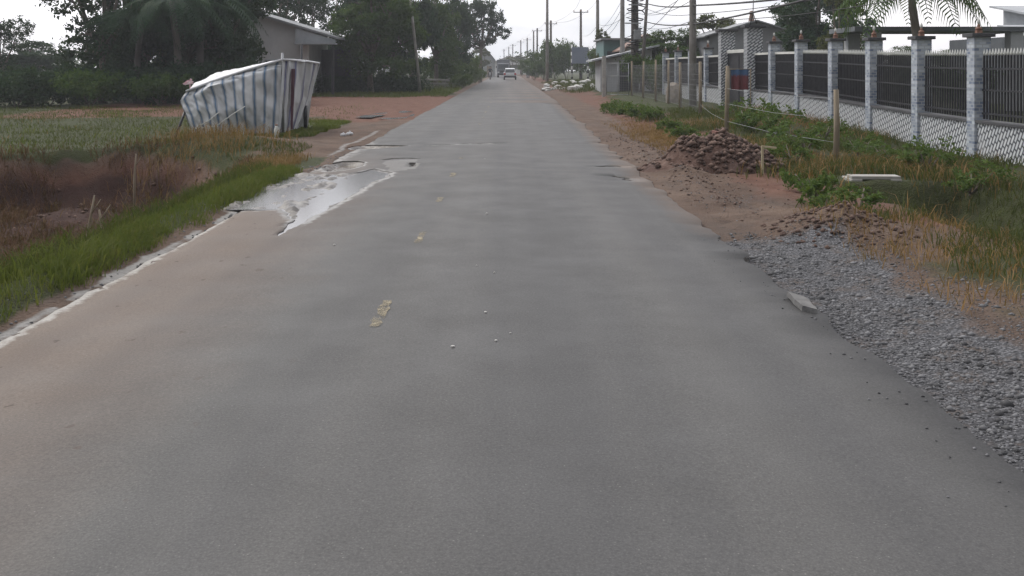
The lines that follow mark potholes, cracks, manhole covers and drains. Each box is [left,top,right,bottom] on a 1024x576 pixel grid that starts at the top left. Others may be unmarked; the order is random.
pothole [222,169,391,236]
pothole [322,162,364,172]
